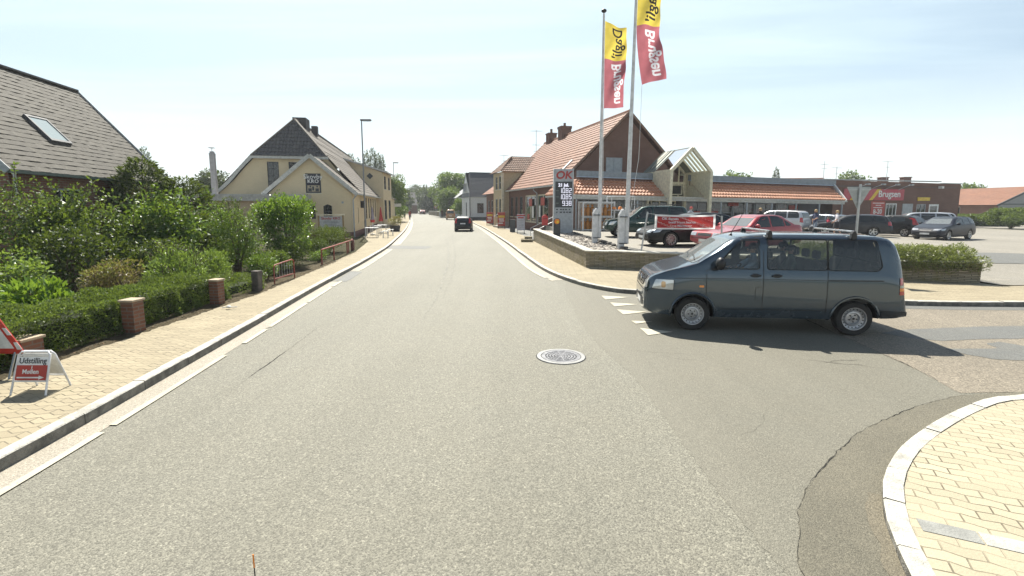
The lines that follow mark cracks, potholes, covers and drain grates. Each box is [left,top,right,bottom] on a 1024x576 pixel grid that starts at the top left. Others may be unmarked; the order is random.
manhole cover [536,349,586,365]
